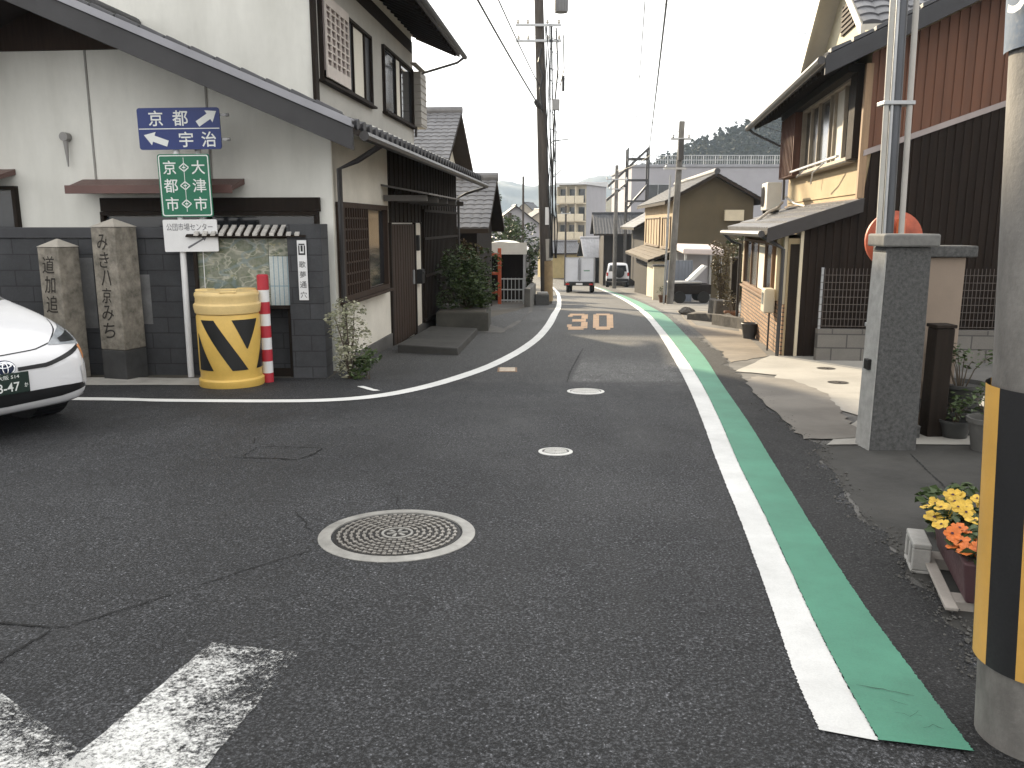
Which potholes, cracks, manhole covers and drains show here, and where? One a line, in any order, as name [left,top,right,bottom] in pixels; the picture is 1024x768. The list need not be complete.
crack [0,549,313,662]
manhole cover [538,447,573,456]
manhole cover [318,509,475,563]
